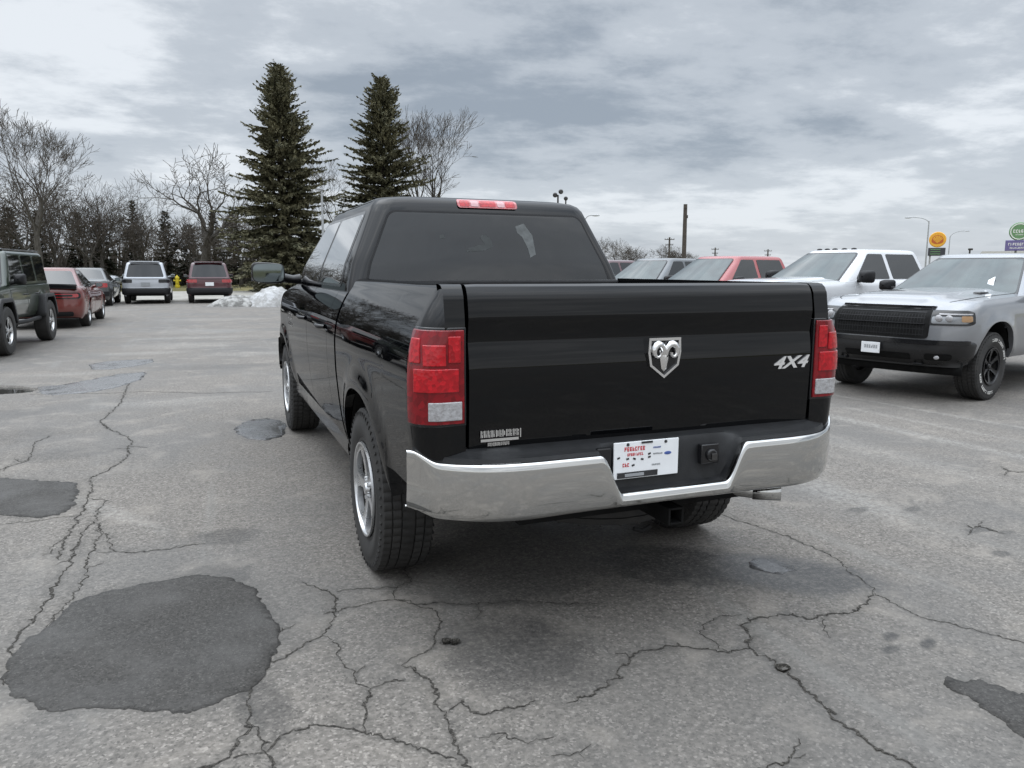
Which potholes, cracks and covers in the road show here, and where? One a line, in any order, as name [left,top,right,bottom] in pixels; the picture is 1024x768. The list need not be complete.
crack [199,568,596,768]
crack [568,514,1024,768]
crack [2,384,206,685]
